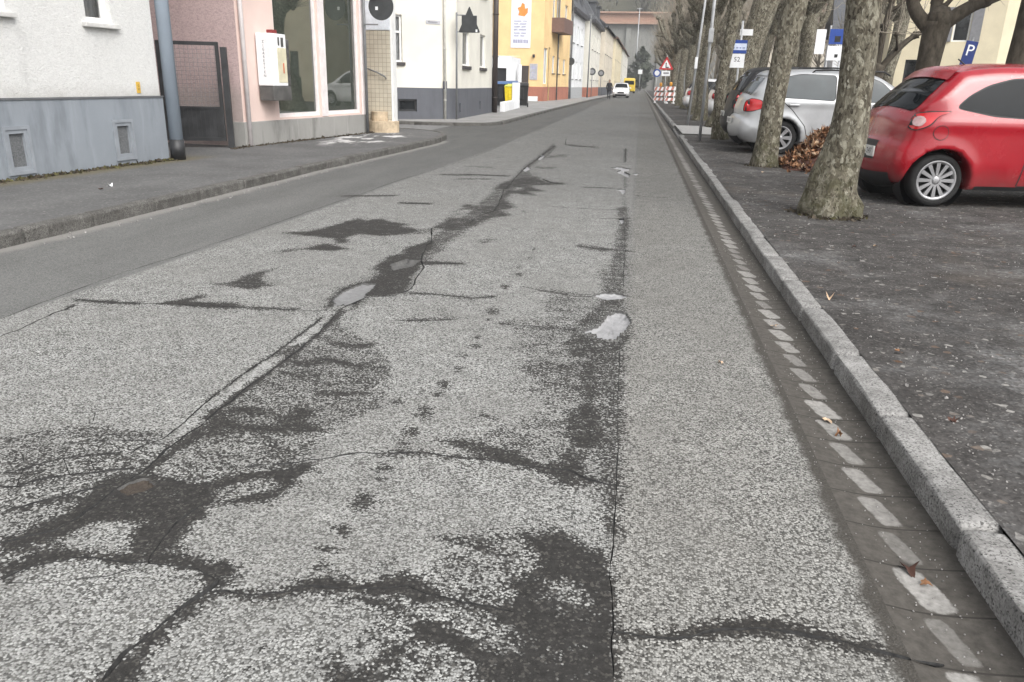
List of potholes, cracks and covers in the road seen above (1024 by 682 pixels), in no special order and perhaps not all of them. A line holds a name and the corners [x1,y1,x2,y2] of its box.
pothole [581,311,632,340]
pothole [592,292,629,300]
crack [611,627,944,668]
pothole [390,259,422,271]
pothole [331,283,377,307]
crack [0,146,555,681]
crack [246,451,630,488]
